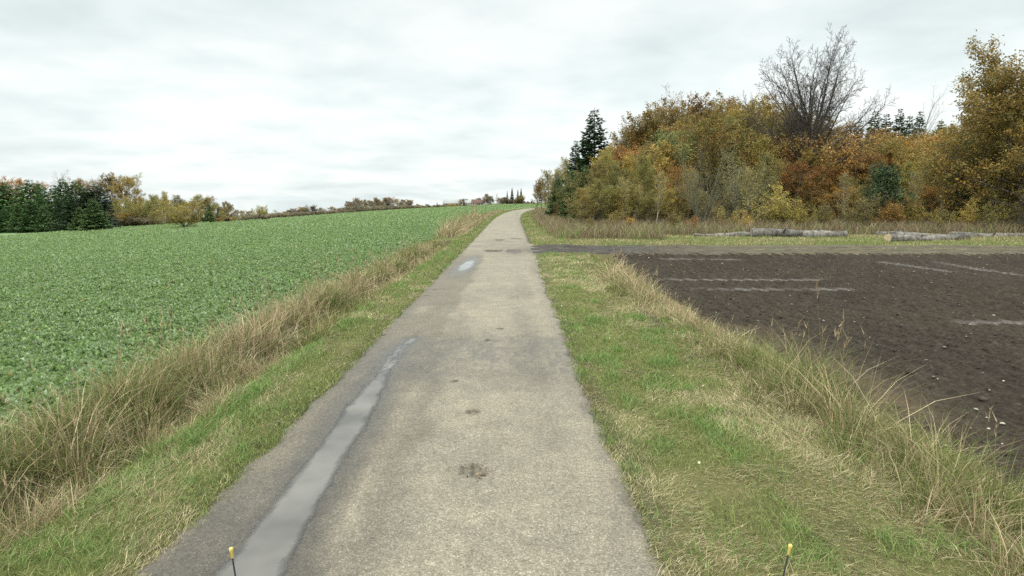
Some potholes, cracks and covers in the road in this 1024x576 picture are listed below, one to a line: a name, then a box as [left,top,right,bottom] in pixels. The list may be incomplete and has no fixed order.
pothole [457,462,492,478]
